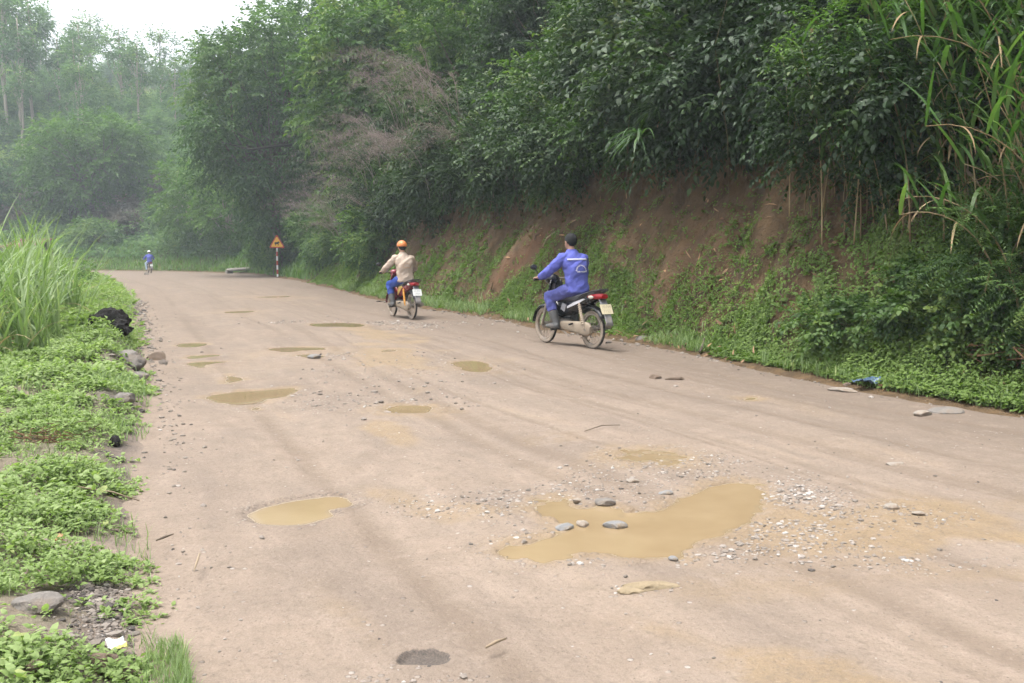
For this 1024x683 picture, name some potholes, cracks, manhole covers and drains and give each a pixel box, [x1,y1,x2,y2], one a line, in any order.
pothole [206,373,265,386]
pothole [185,385,314,408]
pothole [170,360,243,370]
pothole [435,359,510,374]
pothole [226,490,372,529]
pothole [587,444,715,471]
pothole [365,402,452,416]
pothole [474,476,789,568]
pothole [170,353,237,361]
pothole [253,346,339,354]
